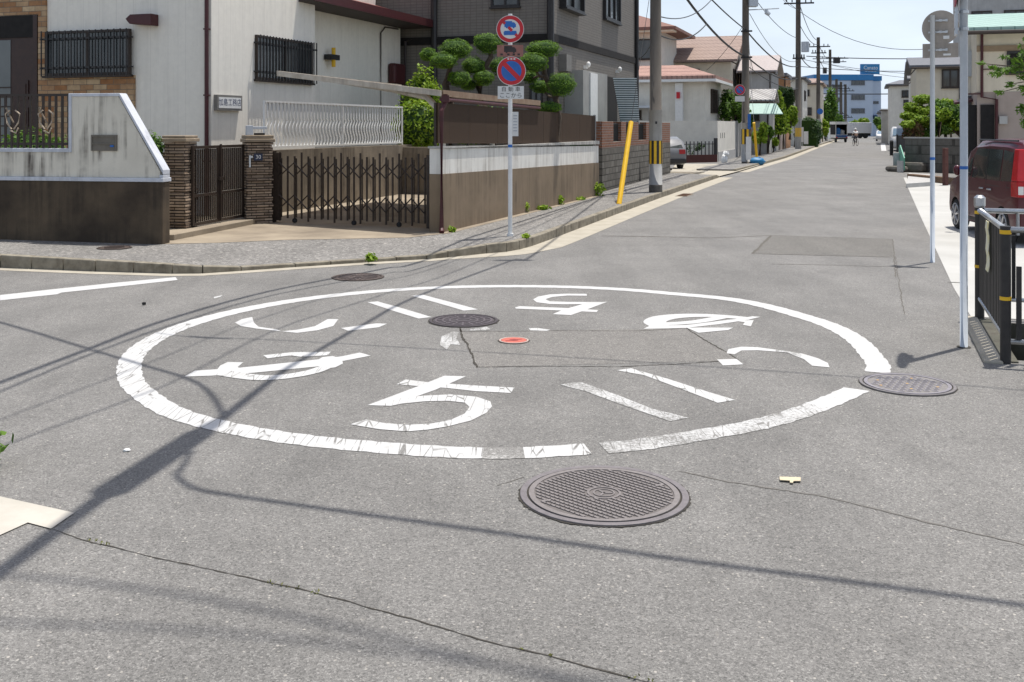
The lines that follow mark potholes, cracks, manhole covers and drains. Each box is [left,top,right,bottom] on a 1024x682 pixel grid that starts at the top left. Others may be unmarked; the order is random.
crack [798,256,916,314]
manhole cover [858,372,958,397]
manhole cover [518,465,691,527]
manhole cover [331,273,385,281]
manhole cover [428,314,499,328]
